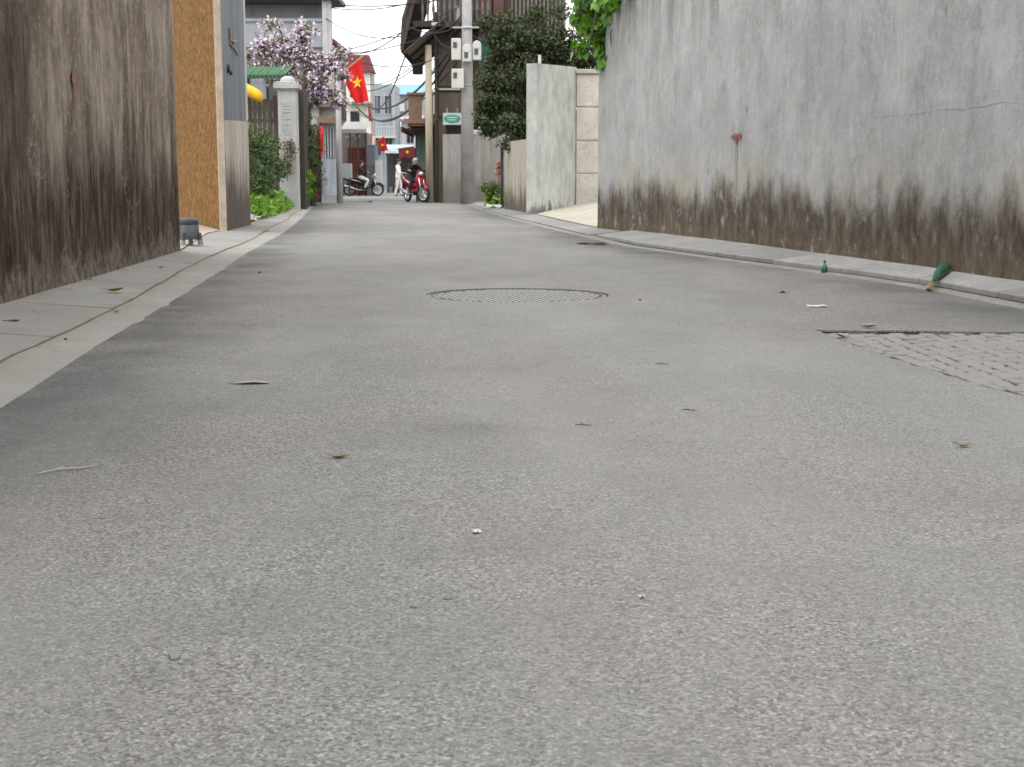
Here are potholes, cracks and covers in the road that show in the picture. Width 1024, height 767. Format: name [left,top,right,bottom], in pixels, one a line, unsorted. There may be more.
manhole cover [428,289,606,302]
